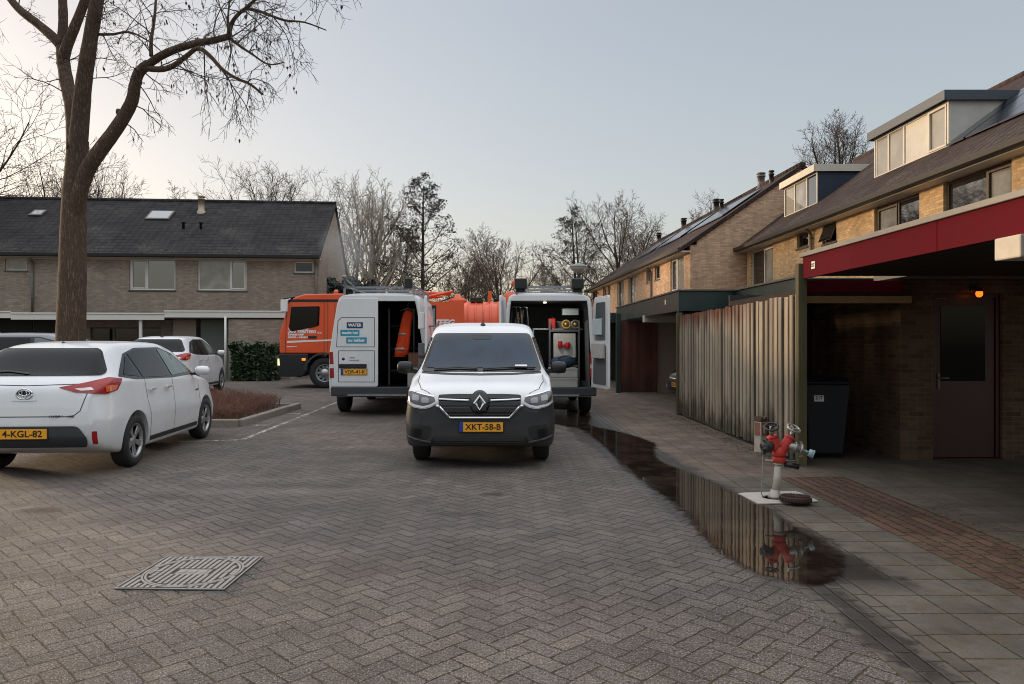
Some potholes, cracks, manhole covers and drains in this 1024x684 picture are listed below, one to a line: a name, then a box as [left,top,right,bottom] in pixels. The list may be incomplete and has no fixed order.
manhole cover [114,556,263,591]
